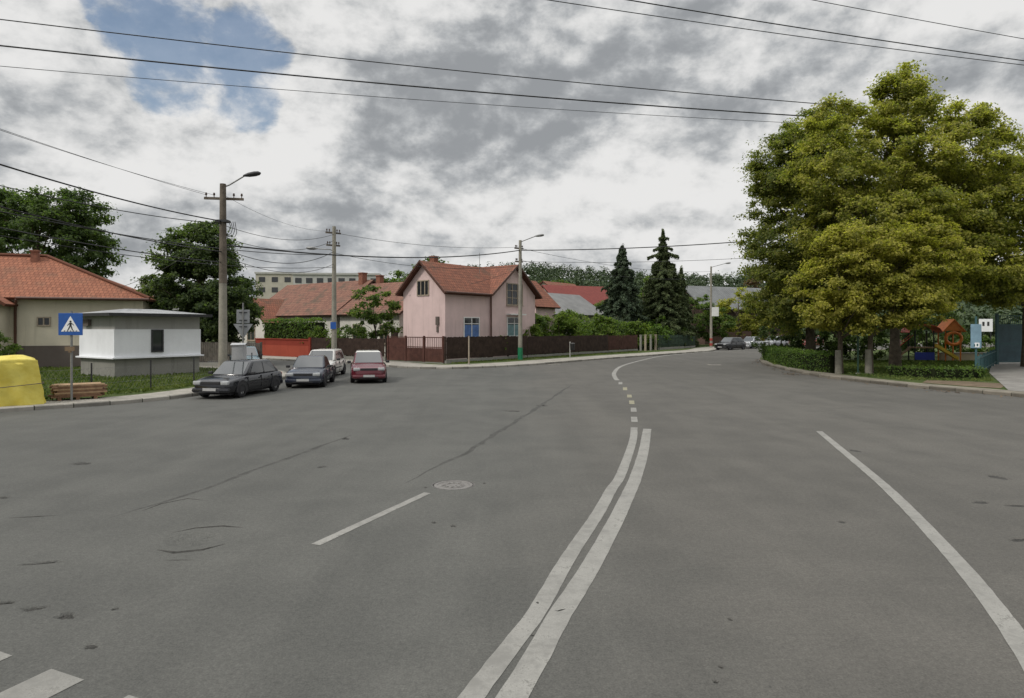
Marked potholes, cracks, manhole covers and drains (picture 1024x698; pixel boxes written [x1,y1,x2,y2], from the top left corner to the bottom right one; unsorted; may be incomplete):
pothole [53,611,78,620]
manhole cover [431,480,475,490]
